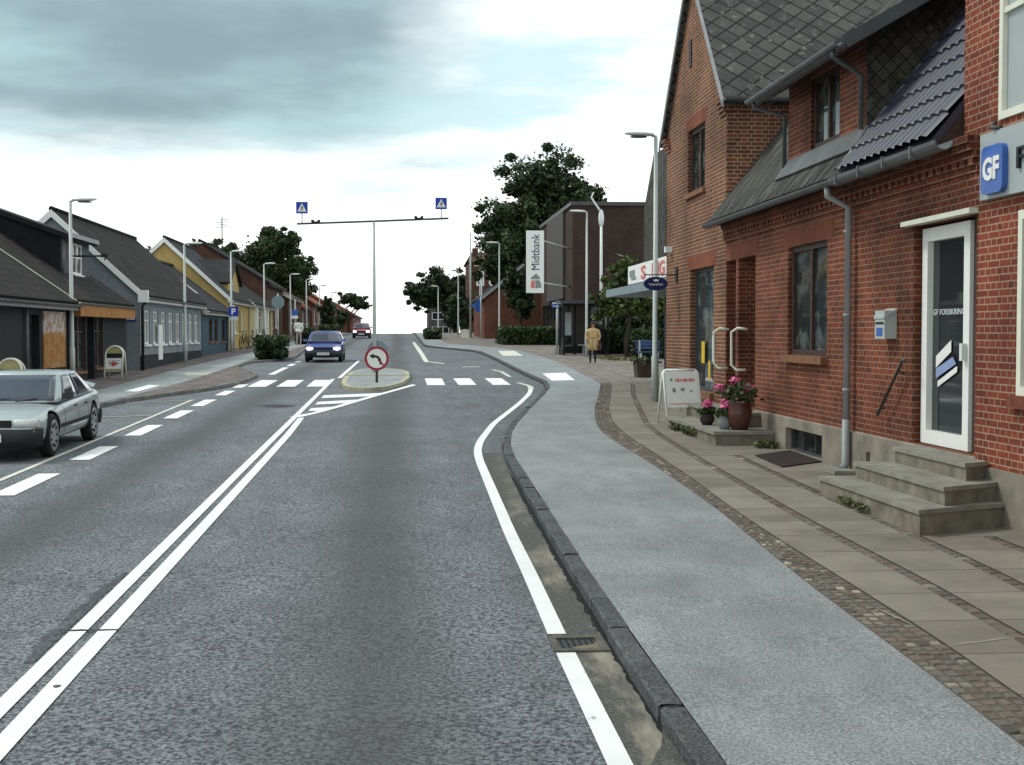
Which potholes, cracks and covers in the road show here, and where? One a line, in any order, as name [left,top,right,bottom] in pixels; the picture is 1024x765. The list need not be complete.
drain grate [548,634,611,654]
